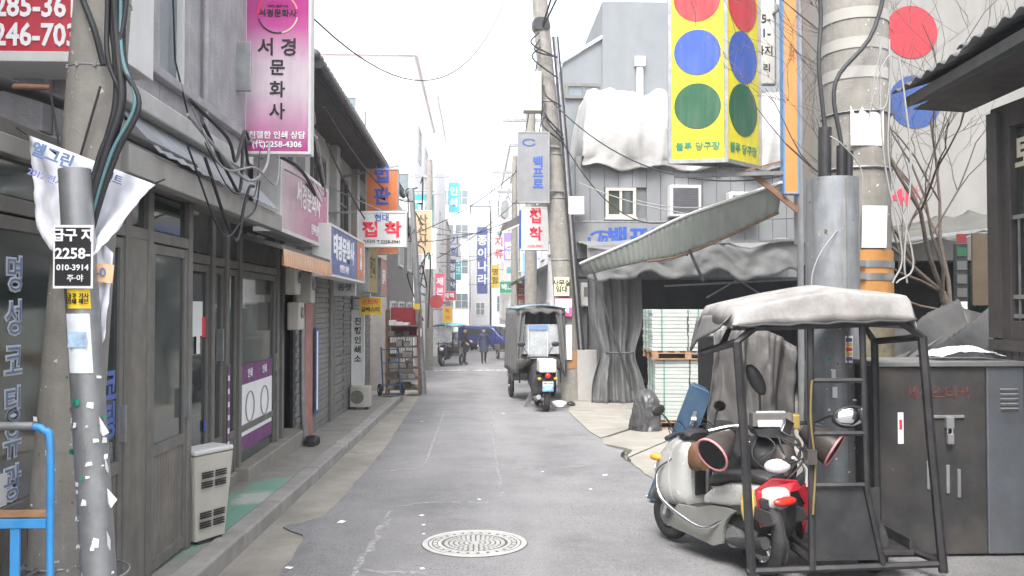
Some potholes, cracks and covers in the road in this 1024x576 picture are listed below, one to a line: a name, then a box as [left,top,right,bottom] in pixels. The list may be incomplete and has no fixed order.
crack [350,411,600,576]
manhole cover [421,530,528,558]
